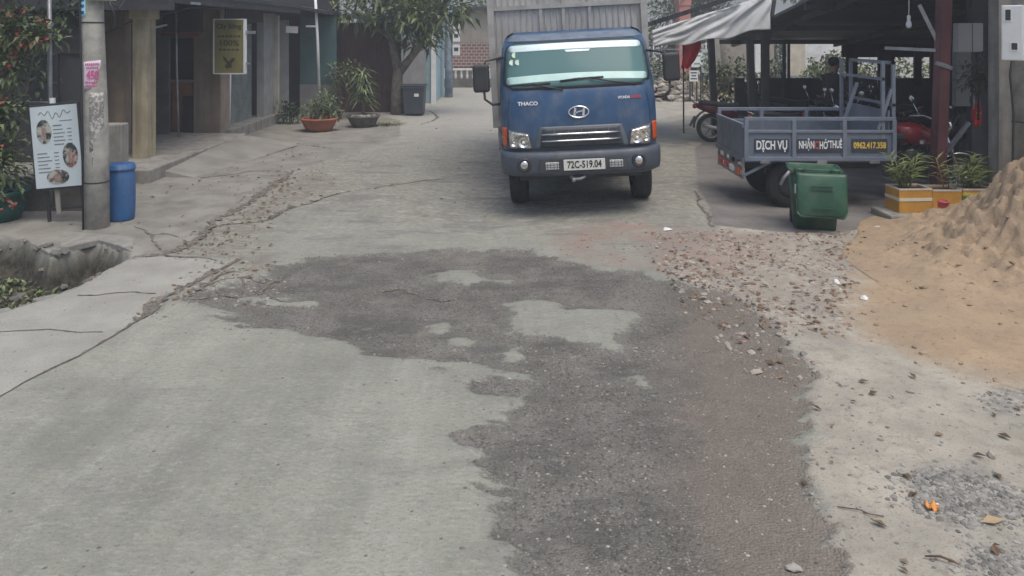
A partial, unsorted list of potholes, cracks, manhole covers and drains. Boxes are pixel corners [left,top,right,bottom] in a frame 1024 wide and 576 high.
crack [127,170,440,321]
